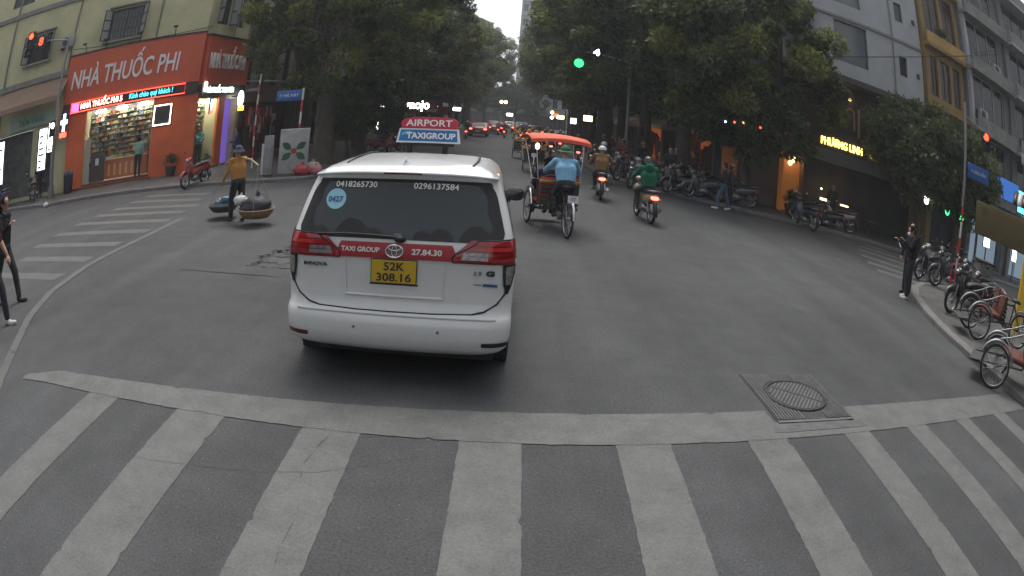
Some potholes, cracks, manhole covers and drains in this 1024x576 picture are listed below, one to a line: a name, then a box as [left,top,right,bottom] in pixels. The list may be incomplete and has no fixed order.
manhole cover [739,374,868,433]
